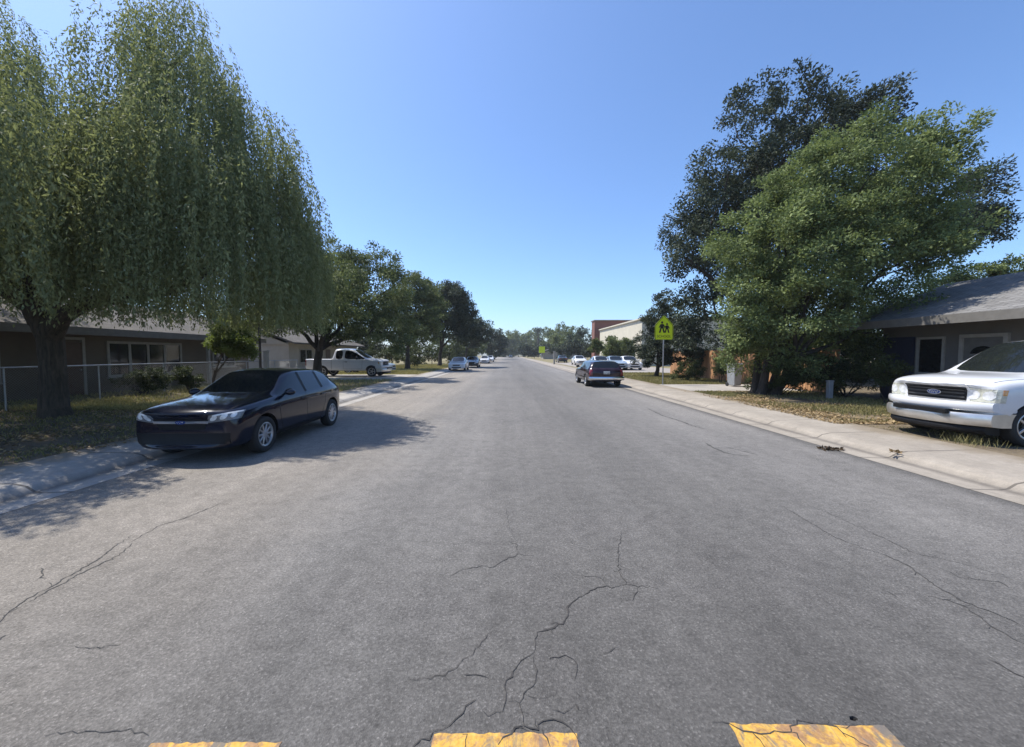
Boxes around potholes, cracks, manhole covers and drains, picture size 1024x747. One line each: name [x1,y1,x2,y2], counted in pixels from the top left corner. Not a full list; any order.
crack [452,511,534,575]
crack [785,507,1023,643]
crack [0,504,218,648]
crack [413,534,651,746]
crack [45,724,148,736]
